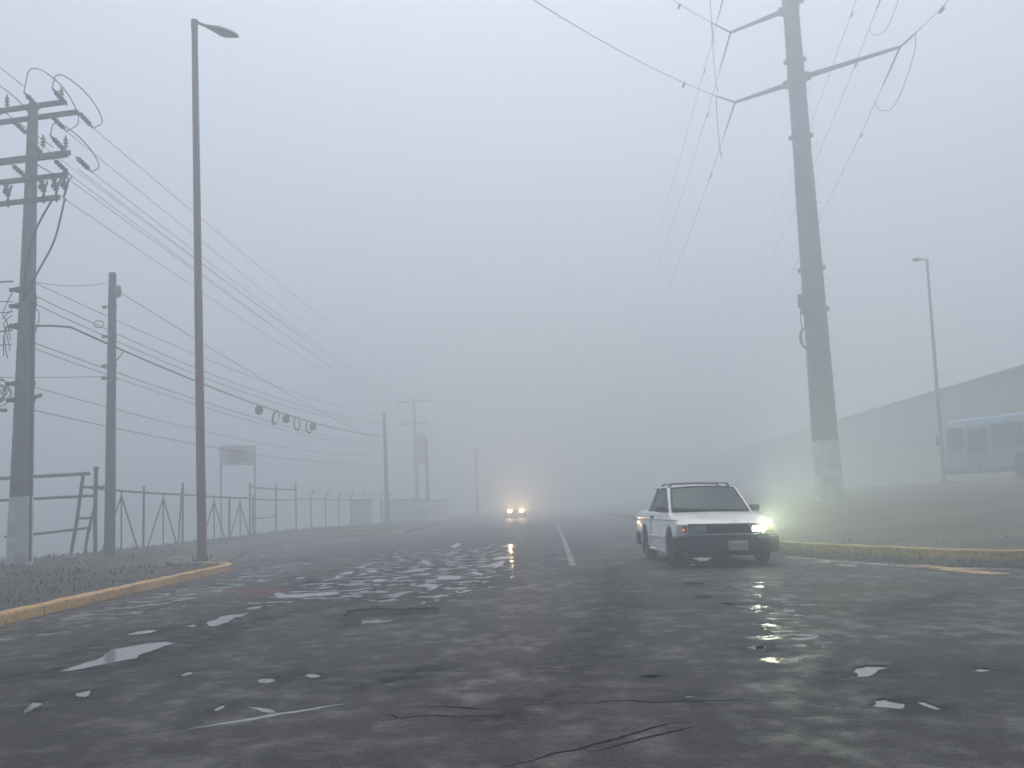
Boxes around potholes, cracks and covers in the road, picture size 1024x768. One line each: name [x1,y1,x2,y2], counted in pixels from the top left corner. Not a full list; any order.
pothole [915,700,942,710]
pothole [58,640,178,672]
pothole [205,612,249,626]
crack [381,706,499,721]
crack [504,722,693,767]
pothole [841,665,892,679]
pothole [474,561,506,569]
pothole [22,701,42,713]
pothole [871,698,906,709]
